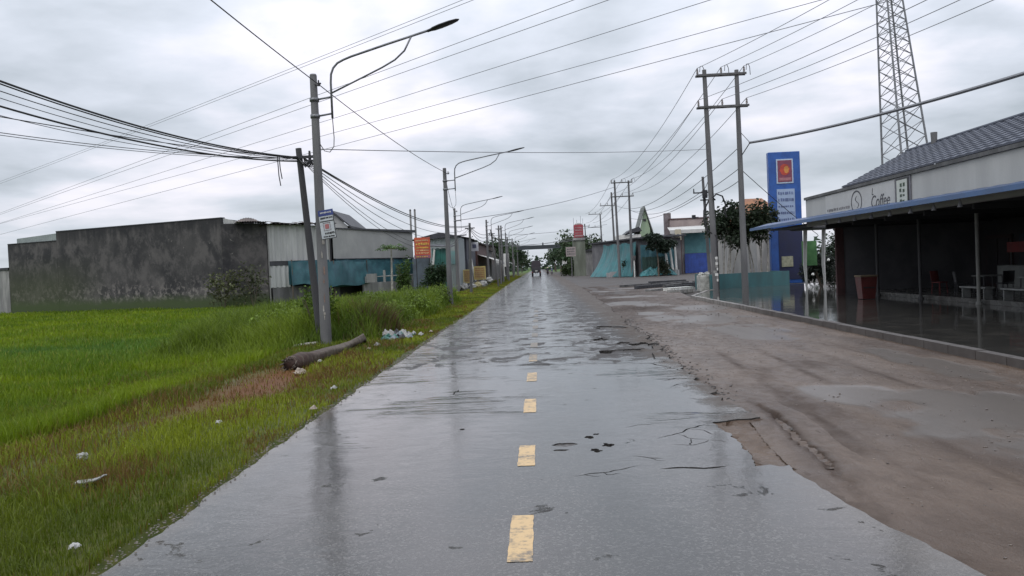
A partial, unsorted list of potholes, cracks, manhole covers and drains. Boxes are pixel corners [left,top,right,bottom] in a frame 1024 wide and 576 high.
pothole [713,417,835,469]
crack [580,394,906,503]
